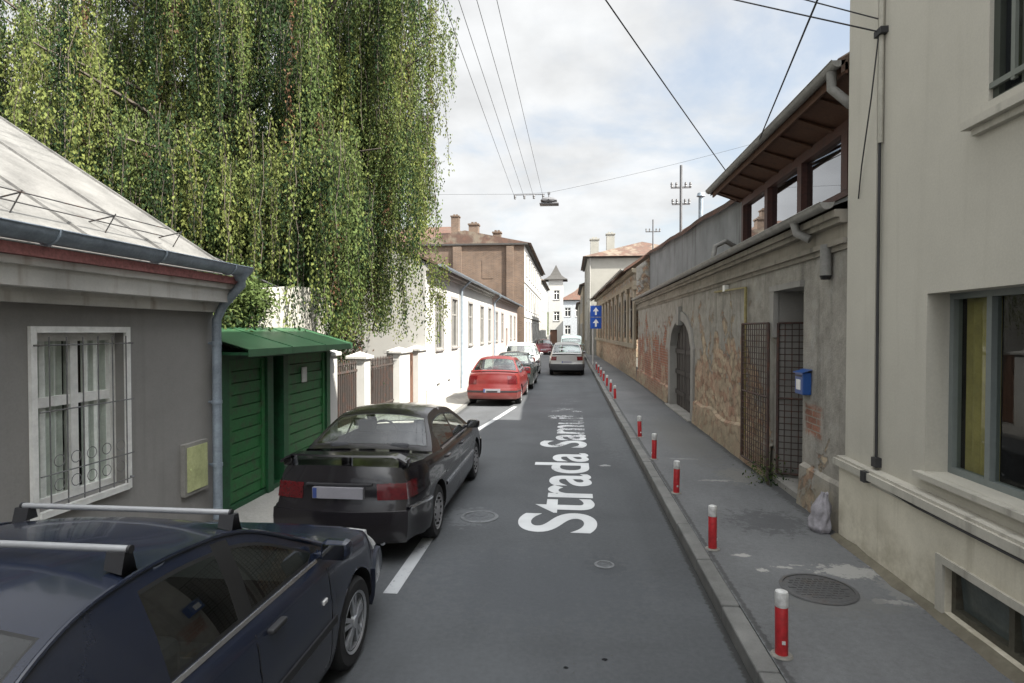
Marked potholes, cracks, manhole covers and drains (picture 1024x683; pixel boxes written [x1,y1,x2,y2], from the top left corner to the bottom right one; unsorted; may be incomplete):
manhole cover [461,510,498,523]
manhole cover [594,560,614,568]
manhole cover [779,573,860,605]
